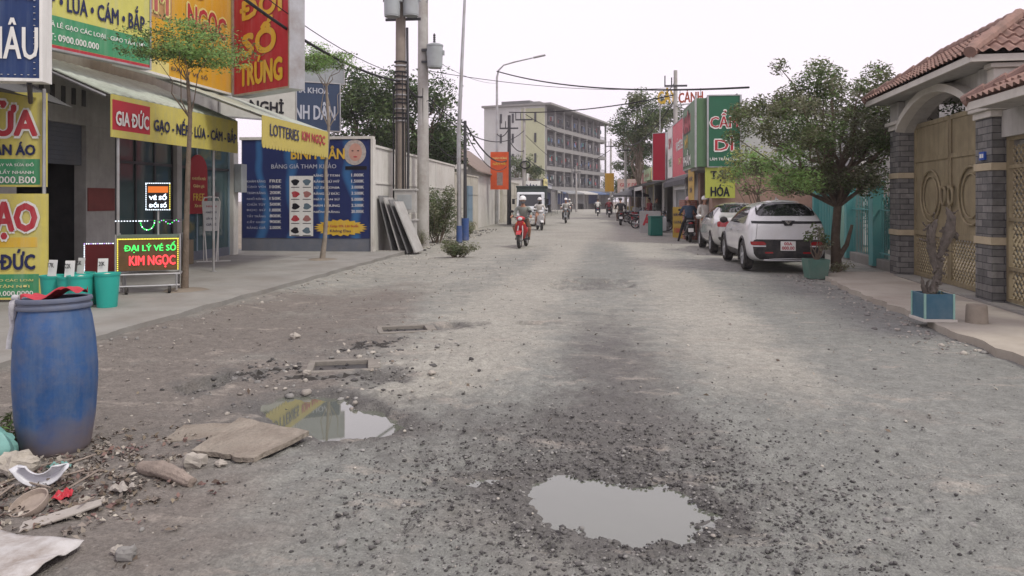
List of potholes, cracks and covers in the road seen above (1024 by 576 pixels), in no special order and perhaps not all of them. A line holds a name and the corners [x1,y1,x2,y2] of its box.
pothole [250,390,420,444]
pothole [500,468,734,553]
